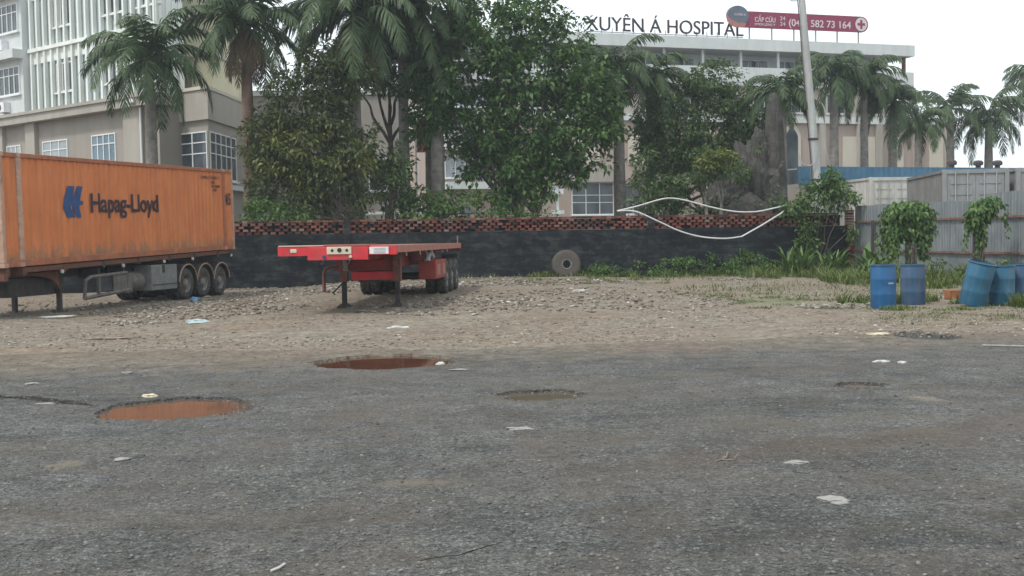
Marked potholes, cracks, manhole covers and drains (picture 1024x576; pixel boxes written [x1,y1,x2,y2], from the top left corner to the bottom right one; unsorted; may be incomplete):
pothole [302,353,460,371]
crack [420,542,502,561]
pothole [494,388,589,401]
crack [0,394,104,407]
pothole [890,331,964,341]
pothole [833,381,890,389]
pothole [90,396,259,422]
